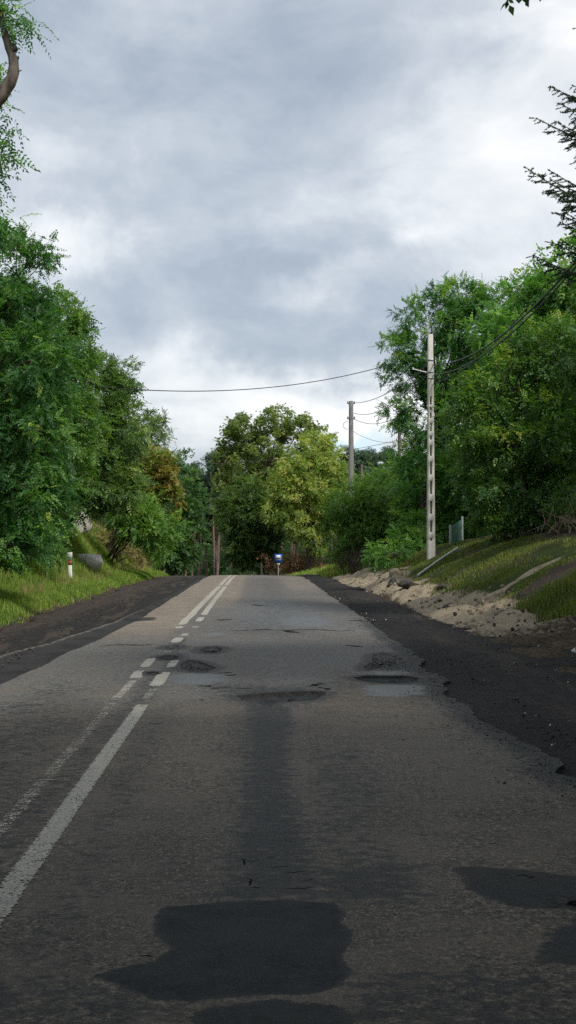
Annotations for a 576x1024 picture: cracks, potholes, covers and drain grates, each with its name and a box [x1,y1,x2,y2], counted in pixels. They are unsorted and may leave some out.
pothole [352,675,419,684]
crack [215,619,375,647]
pothole [364,653,407,671]
pothole [180,660,216,673]
pothole [236,691,326,706]
